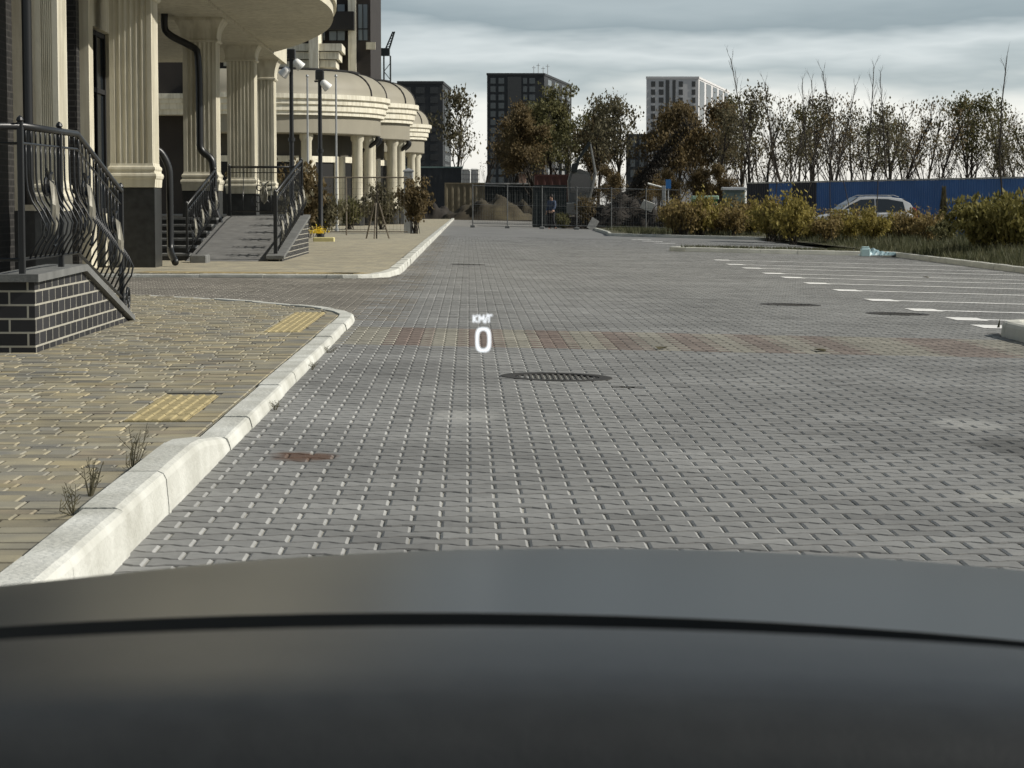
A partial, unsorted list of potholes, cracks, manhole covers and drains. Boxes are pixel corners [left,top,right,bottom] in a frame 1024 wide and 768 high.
manhole cover [501,372,612,382]
